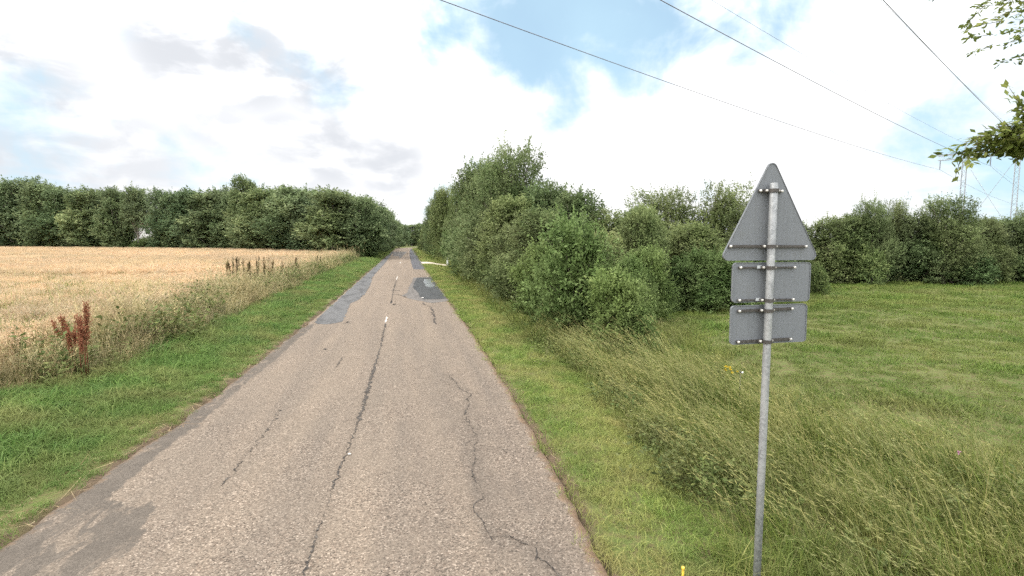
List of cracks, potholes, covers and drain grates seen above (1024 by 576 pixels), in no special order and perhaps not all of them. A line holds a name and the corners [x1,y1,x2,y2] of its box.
crack [449,375,560,576]
crack [302,323,386,576]
crack [222,410,282,485]
